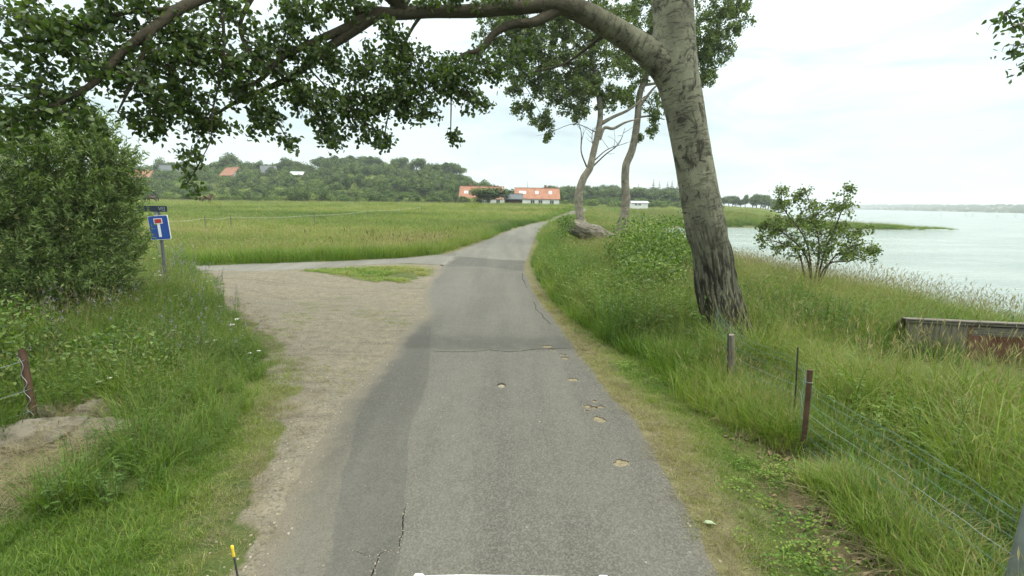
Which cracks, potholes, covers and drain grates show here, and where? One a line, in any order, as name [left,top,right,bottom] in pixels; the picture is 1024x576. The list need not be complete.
crack [349,504,407,576]
